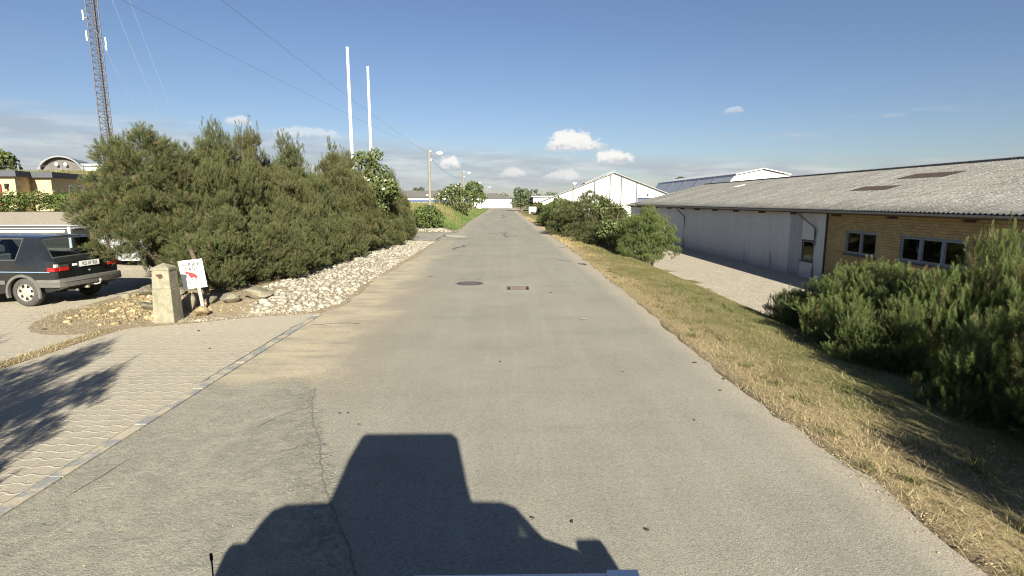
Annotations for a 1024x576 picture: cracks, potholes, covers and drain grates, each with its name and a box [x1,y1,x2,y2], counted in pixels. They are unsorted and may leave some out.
crack [259,388,356,576]
